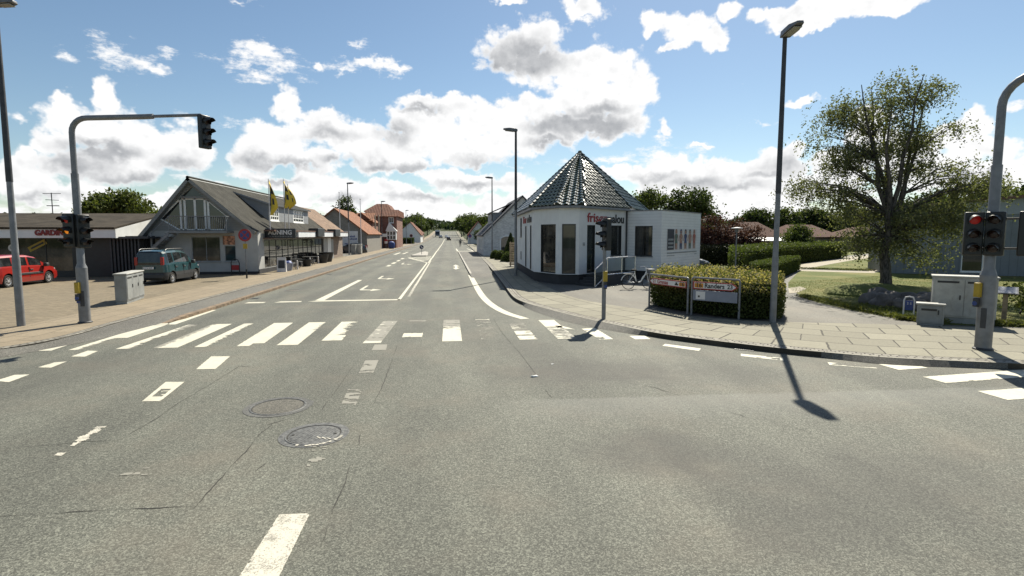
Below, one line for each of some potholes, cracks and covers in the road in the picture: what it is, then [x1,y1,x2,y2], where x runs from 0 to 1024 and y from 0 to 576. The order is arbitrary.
crack [199,420,282,502]
manhole cover [242,397,314,417]
manhole cover [278,423,349,448]
